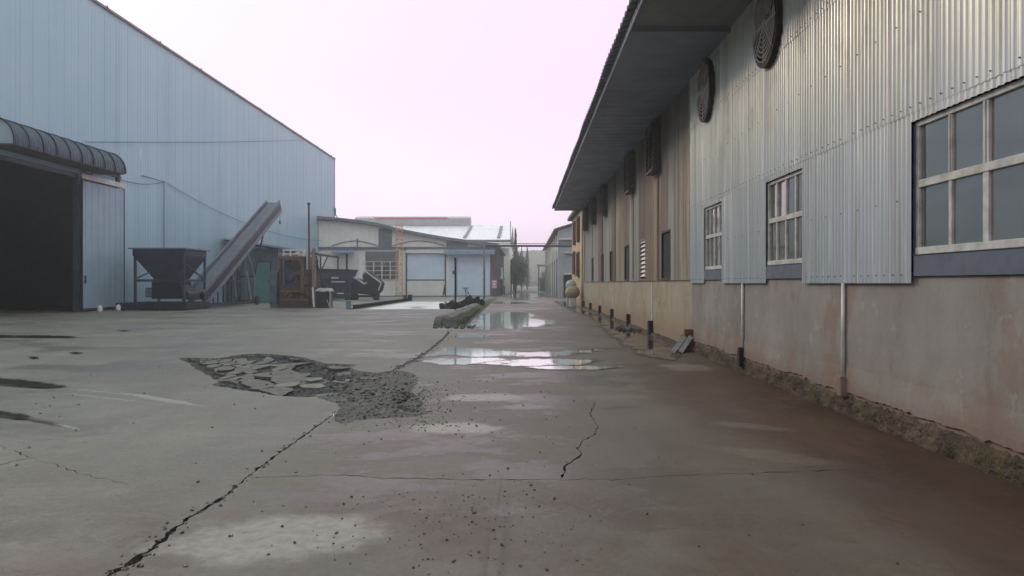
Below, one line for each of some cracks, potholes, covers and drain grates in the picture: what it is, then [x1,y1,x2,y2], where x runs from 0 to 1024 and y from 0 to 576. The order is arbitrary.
crack [393,331,452,370]
crack [1,446,121,483]
pothole [179,354,428,424]
crack [107,402,843,576]
